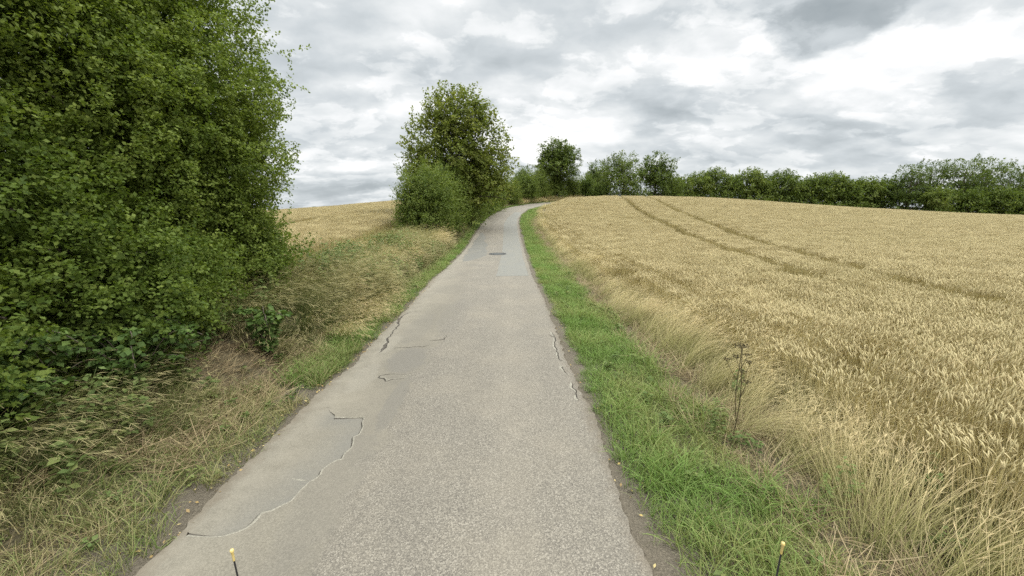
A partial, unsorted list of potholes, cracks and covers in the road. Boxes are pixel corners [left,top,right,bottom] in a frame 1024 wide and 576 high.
crack [186,416,364,537]
crack [550,332,578,400]
crack [378,311,447,353]
